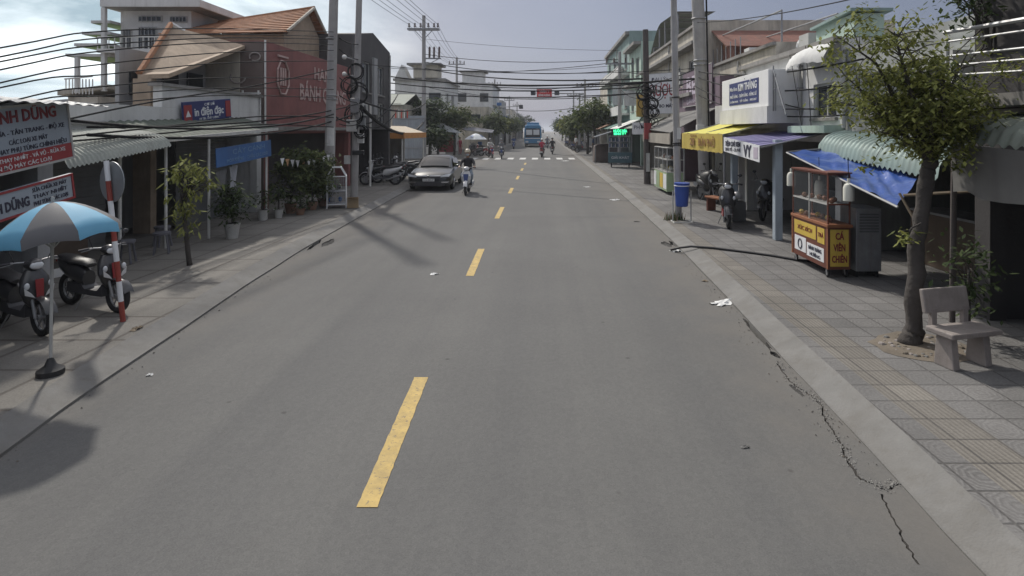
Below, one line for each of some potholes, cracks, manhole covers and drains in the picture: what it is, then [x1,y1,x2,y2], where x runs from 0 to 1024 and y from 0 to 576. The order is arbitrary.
crack [776,361,920,565]
